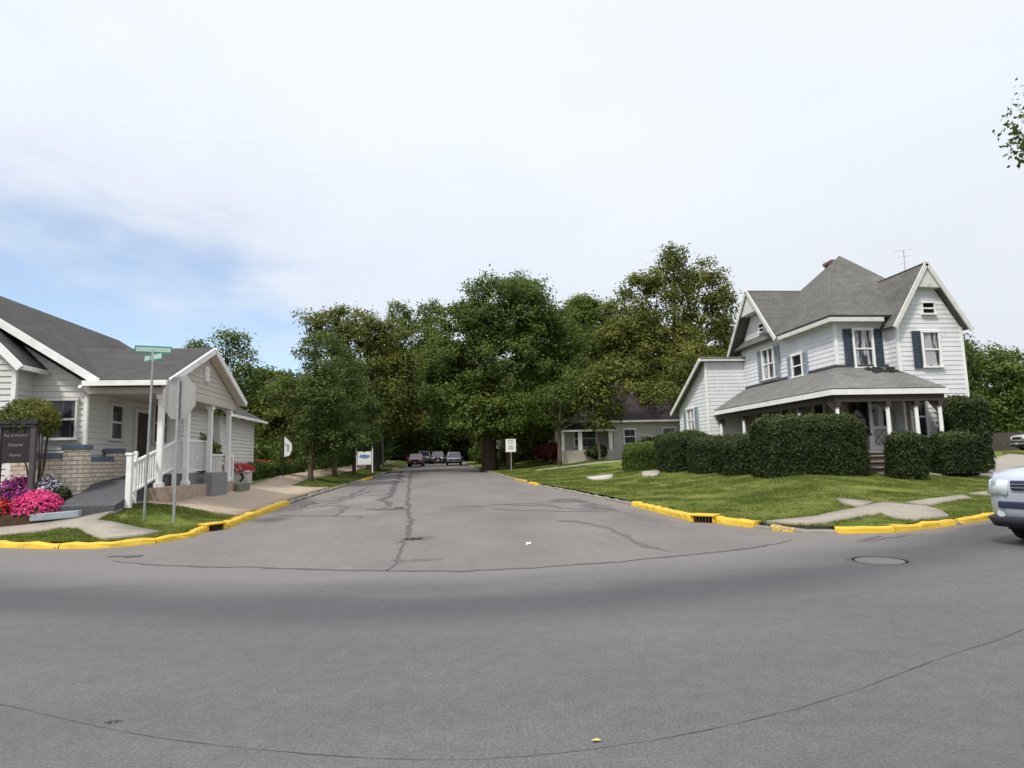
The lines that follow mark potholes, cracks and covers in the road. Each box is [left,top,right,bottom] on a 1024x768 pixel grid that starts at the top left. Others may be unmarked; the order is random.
drain grate [198,522,227,532]
drain grate [690,513,720,523]
manhole cover [846,556,915,565]
crack [108,470,791,572]
